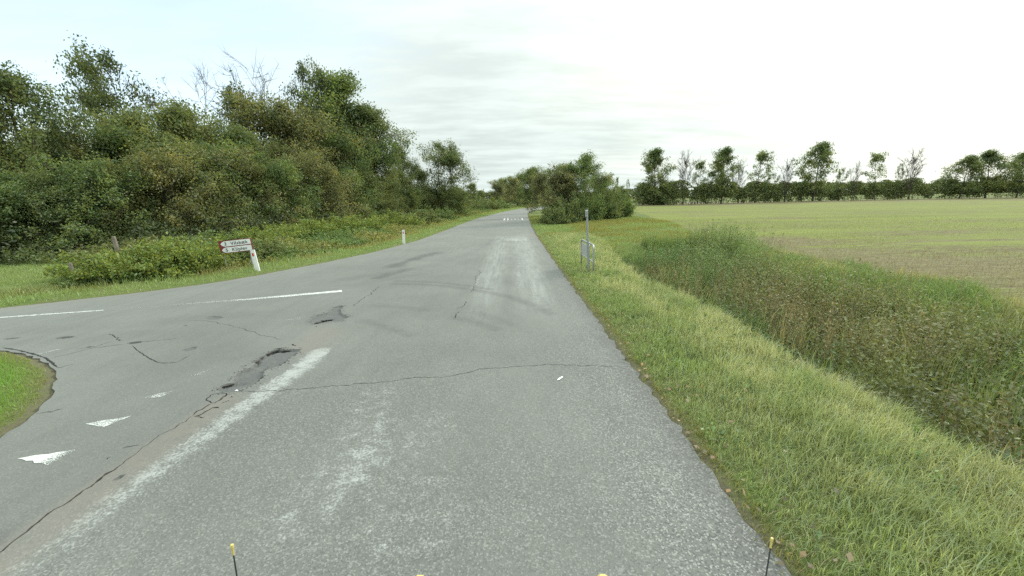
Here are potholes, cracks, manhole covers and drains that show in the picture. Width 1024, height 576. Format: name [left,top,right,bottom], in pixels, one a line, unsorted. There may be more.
crack [241,364,617,392]
crack [5,334,188,368]
pothole [212,347,301,397]
pothole [309,305,350,324]
